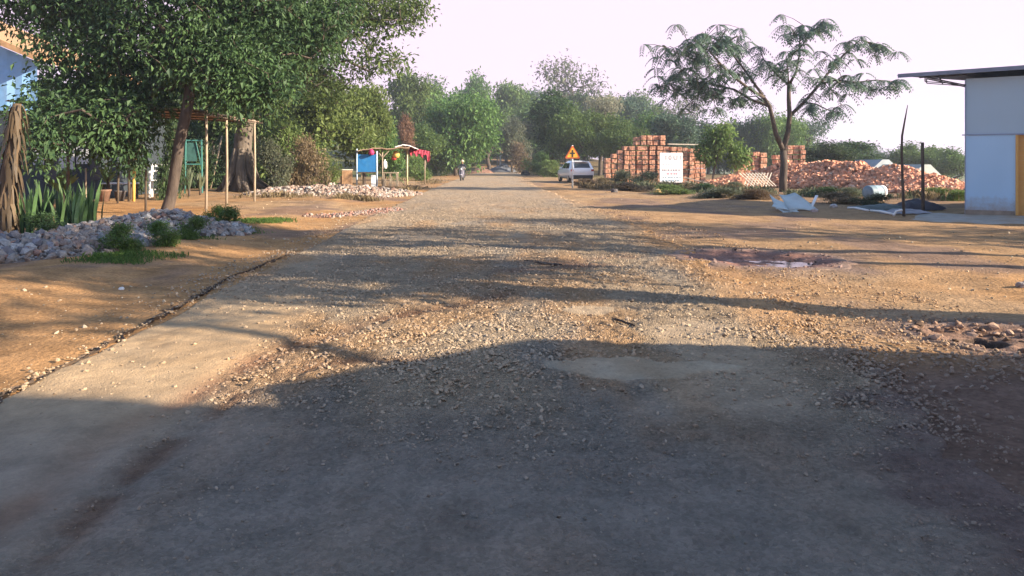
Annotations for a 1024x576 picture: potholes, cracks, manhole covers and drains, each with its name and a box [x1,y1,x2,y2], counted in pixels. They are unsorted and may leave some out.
pothole [897,320,1024,356]
pothole [666,248,858,271]
